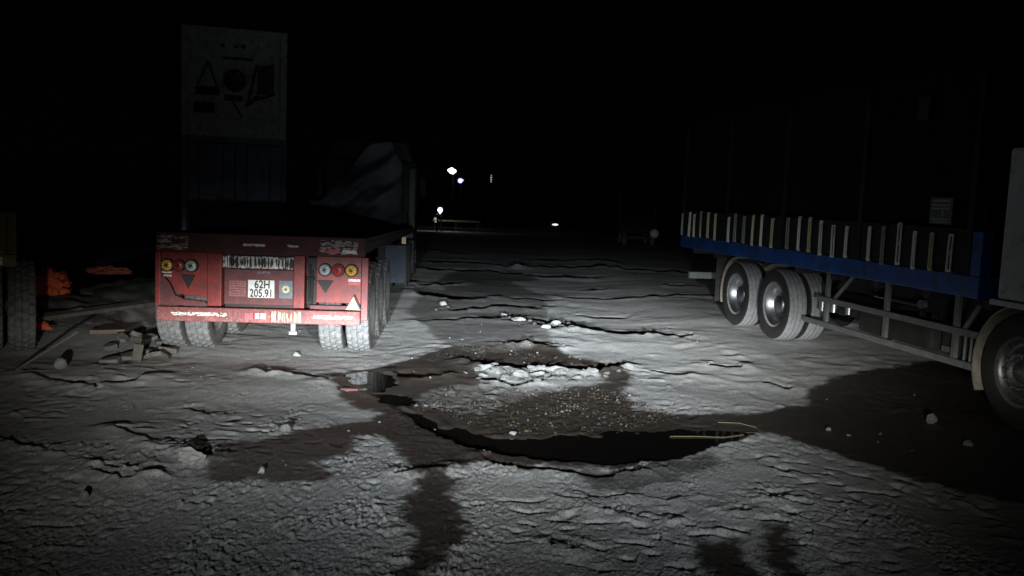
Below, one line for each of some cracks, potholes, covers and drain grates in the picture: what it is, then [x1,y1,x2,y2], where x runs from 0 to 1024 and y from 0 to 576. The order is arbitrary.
crack [26,372,140,387]
pothole [370,393,753,465]
pothole [393,368,442,378]
pothole [482,455,650,478]
pothole [482,362,618,370]
crack [416,250,694,347]
pothole [333,370,400,392]
